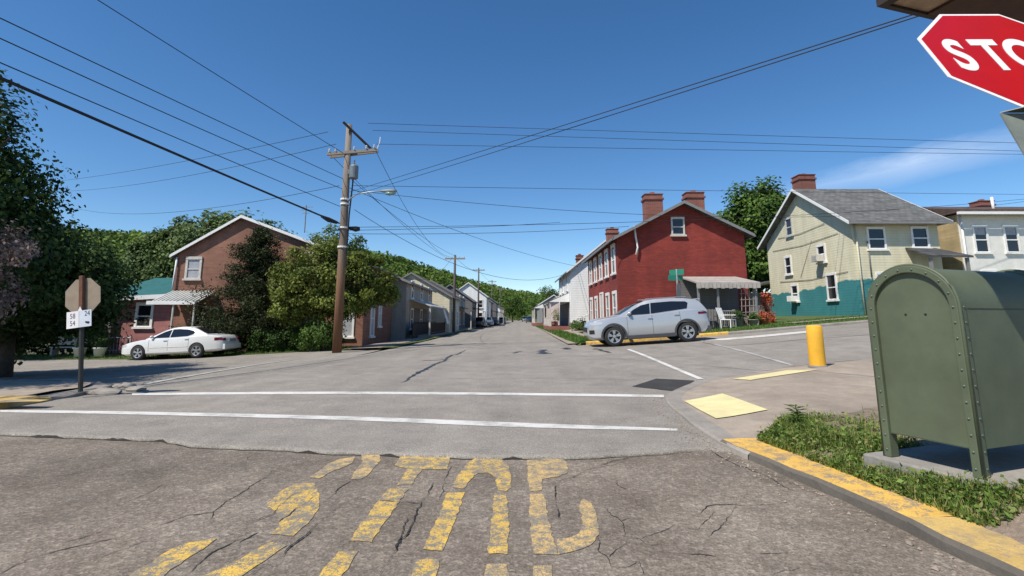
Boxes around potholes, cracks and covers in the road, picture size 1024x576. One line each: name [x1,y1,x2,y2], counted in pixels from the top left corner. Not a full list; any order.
crack [0,531,143,574]
crack [193,482,357,574]
crack [163,474,270,524]
crack [380,469,450,573]
crack [554,447,791,575]
